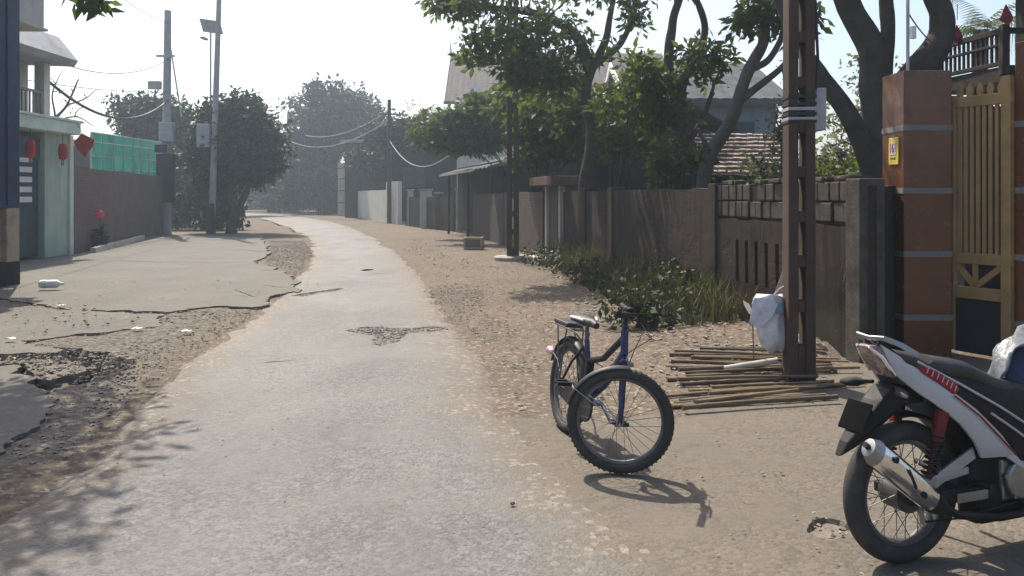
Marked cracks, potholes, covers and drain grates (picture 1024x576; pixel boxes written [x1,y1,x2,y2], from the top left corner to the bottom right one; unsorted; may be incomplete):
pothole [0,354,102,387]
pothole [807,517,849,540]
pothole [346,325,448,346]
